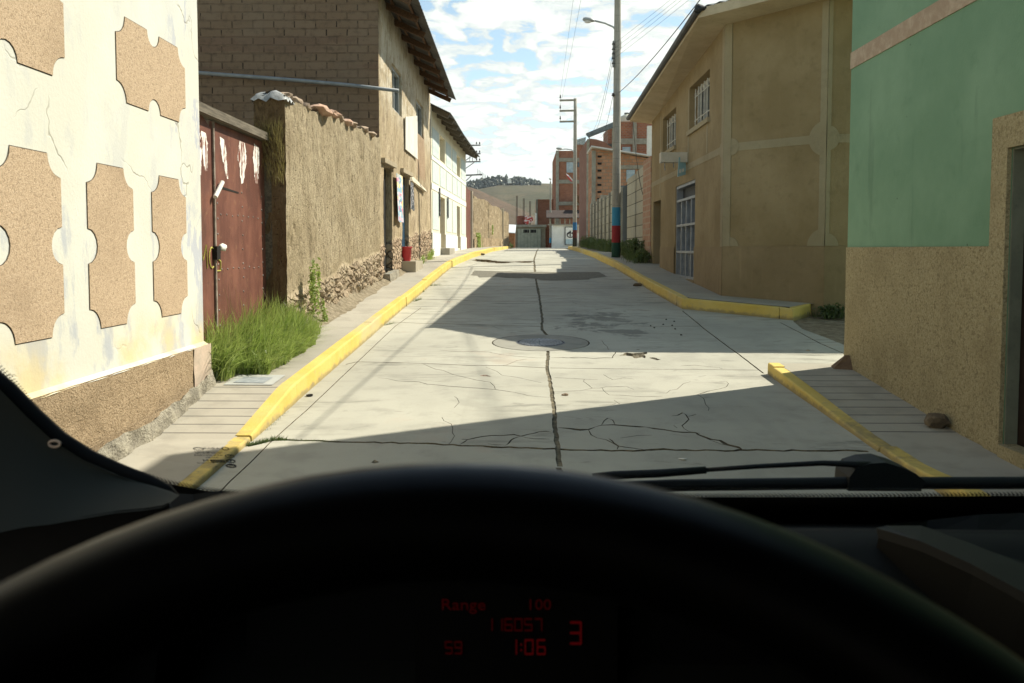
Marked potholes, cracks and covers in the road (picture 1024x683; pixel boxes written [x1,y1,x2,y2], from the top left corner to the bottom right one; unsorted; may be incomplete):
crack [385,341,743,451]
utility cover [223,375,285,385]
manhole cover [492,335,590,352]
